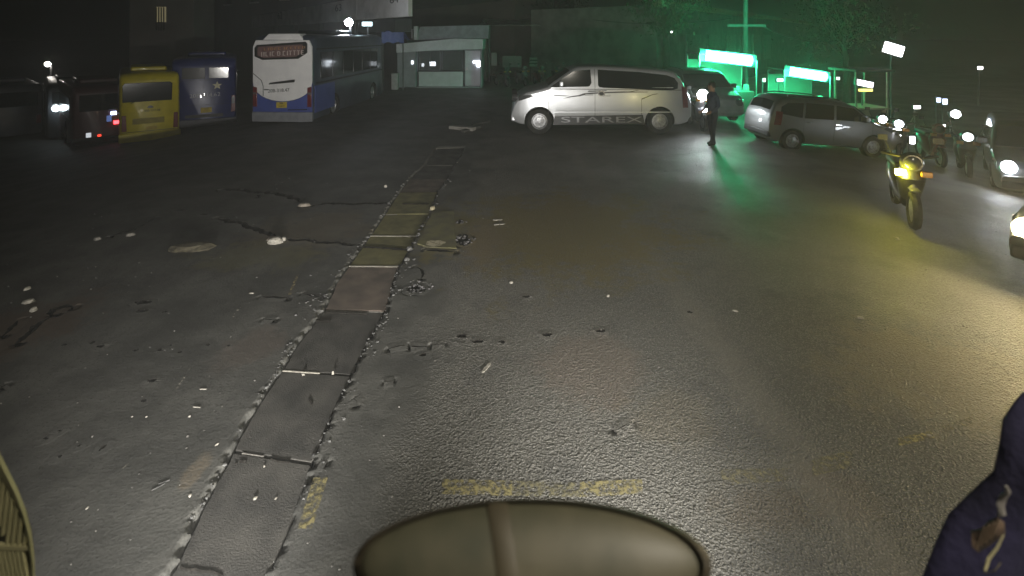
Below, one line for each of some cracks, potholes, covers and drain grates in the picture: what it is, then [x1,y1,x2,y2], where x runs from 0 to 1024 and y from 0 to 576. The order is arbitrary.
pothole [413,349,433,361]
crack [210,187,456,281]
pothole [455,232,475,248]
crack [180,566,222,576]
crack [257,290,368,325]
crack [0,301,81,347]
pothole [401,281,431,296]
